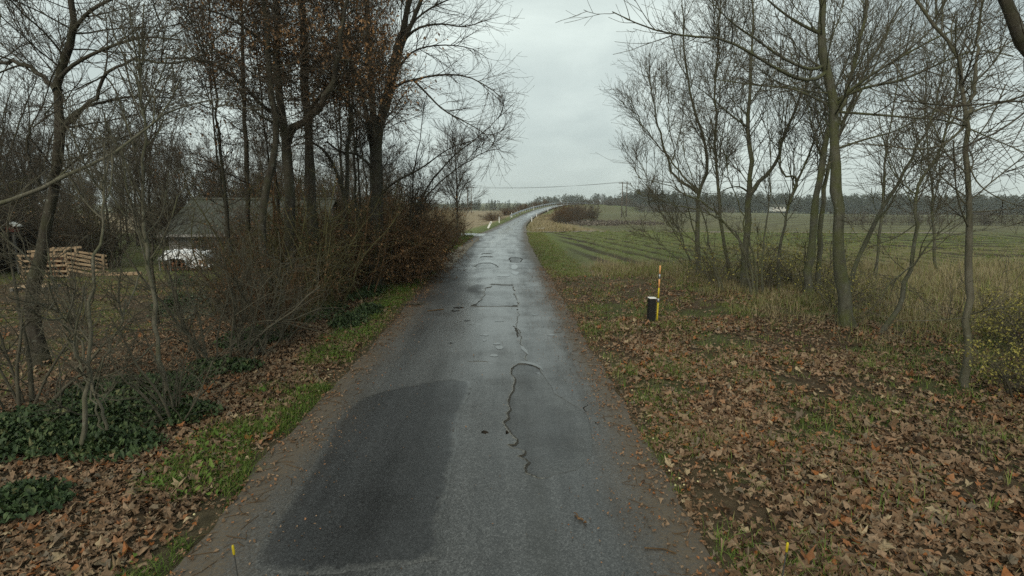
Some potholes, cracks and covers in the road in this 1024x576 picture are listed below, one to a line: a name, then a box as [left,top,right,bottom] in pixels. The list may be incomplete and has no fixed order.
crack [513,311,528,361]
